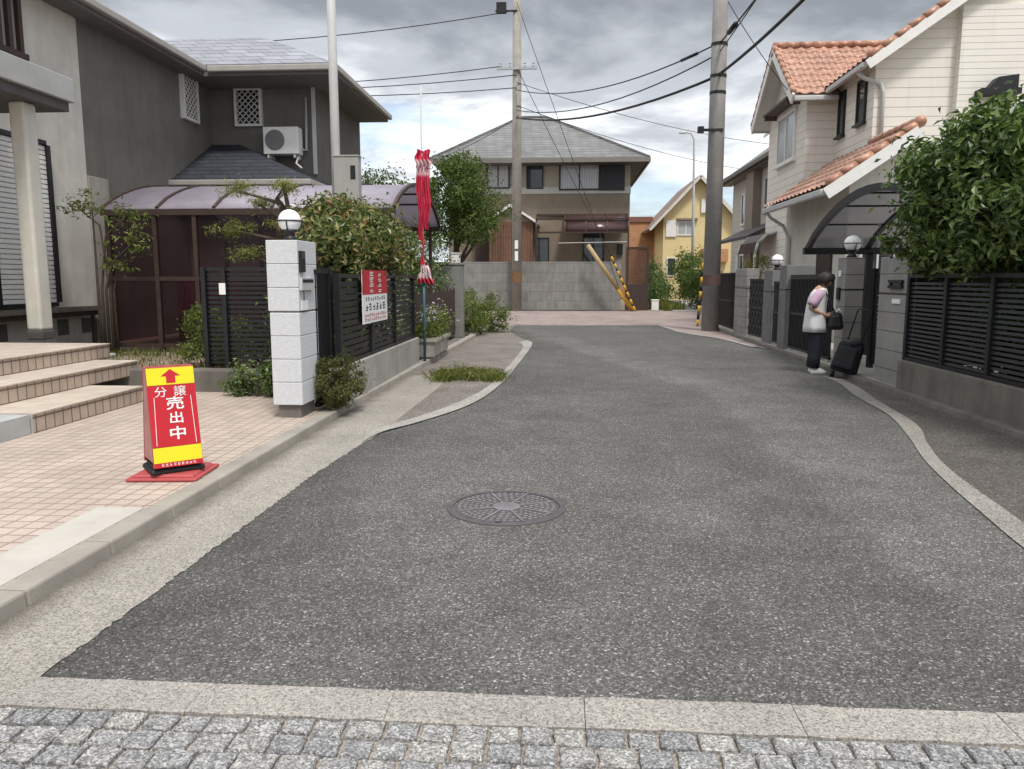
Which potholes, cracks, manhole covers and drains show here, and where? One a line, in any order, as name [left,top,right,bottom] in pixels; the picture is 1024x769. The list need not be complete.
manhole cover [447,490,566,526]
